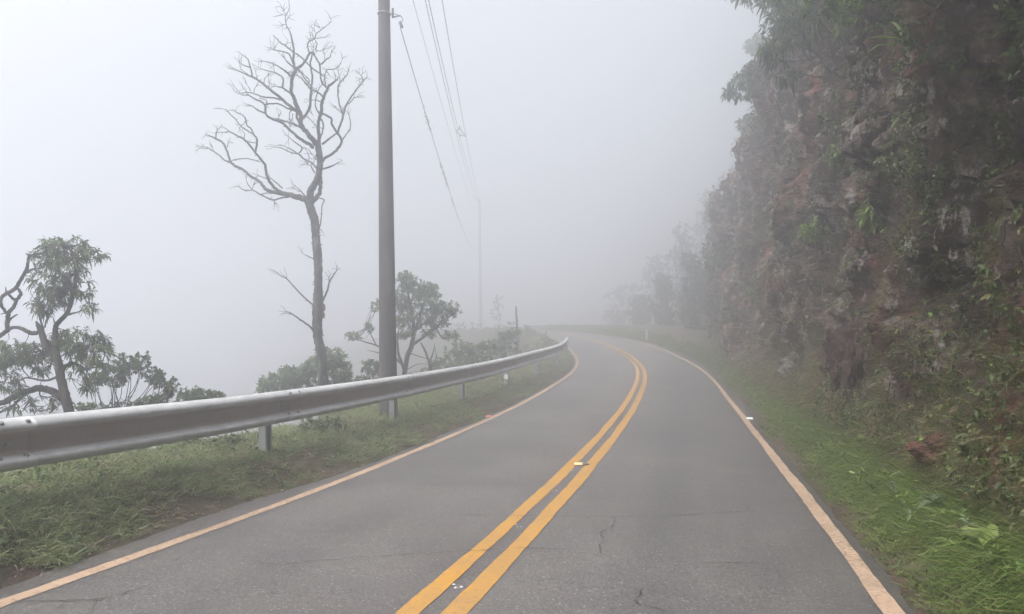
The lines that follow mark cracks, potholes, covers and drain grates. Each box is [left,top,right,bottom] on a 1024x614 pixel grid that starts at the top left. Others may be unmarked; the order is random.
crack [469,506,754,564]
